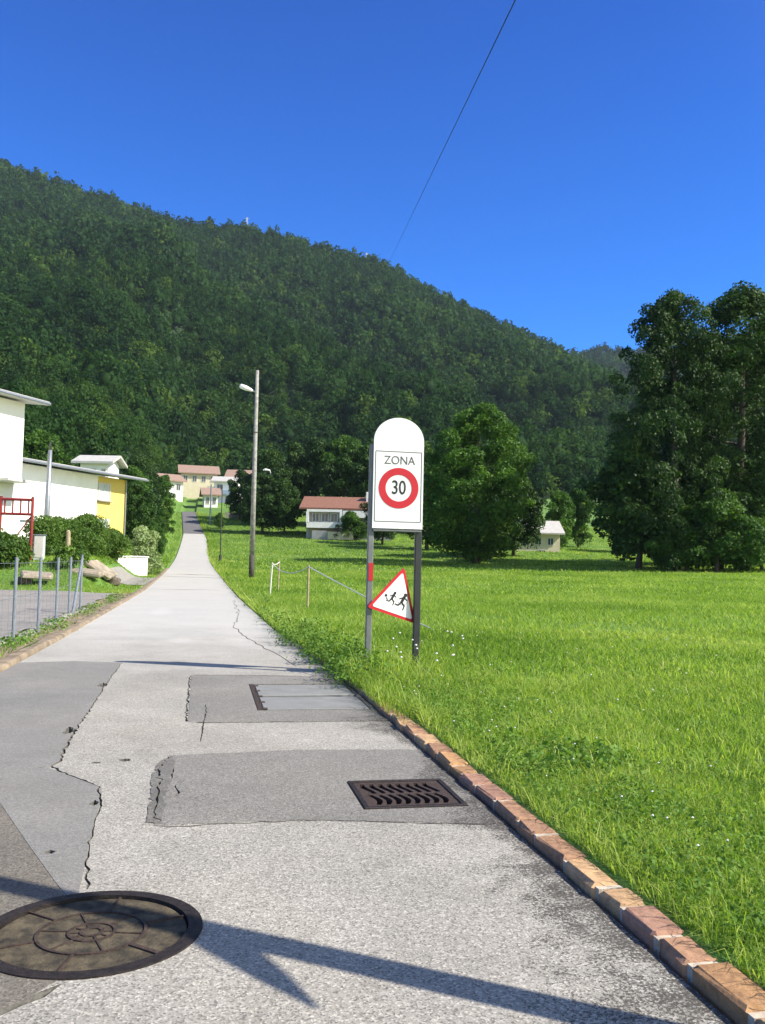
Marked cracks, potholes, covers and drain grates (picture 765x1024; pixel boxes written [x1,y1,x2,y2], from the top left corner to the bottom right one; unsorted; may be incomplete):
crack [233,601,296,676]
manhole cover [0,890,203,981]
drain grate [347,778,469,810]
crack [152,757,491,827]
crack [184,676,369,742]
crack [39,666,120,889]
